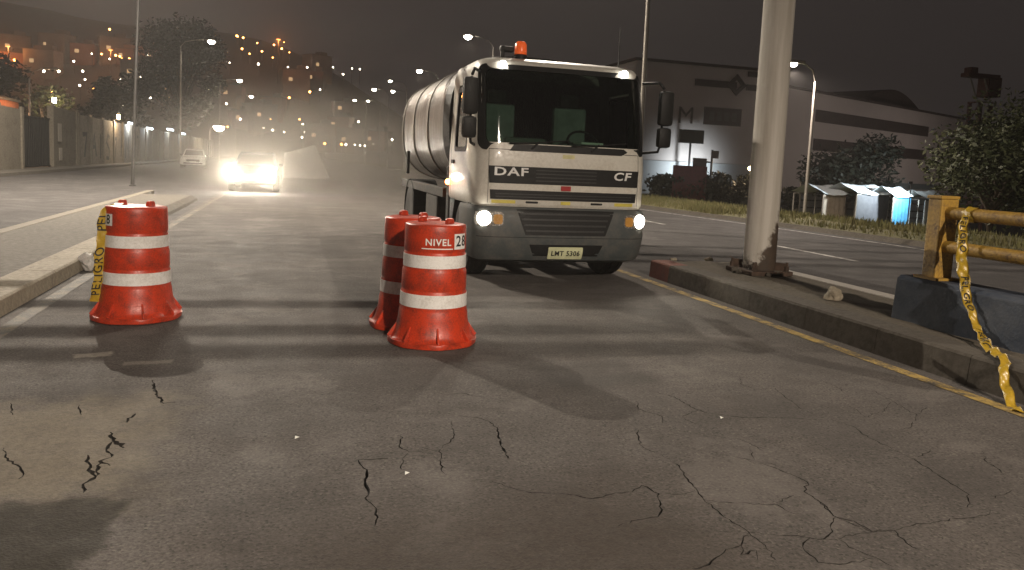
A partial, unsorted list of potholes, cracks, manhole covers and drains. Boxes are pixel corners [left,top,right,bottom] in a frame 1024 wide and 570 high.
crack [492,381,1021,569]
crack [3,448,24,479]
crack [81,380,169,493]
crack [358,416,509,525]
